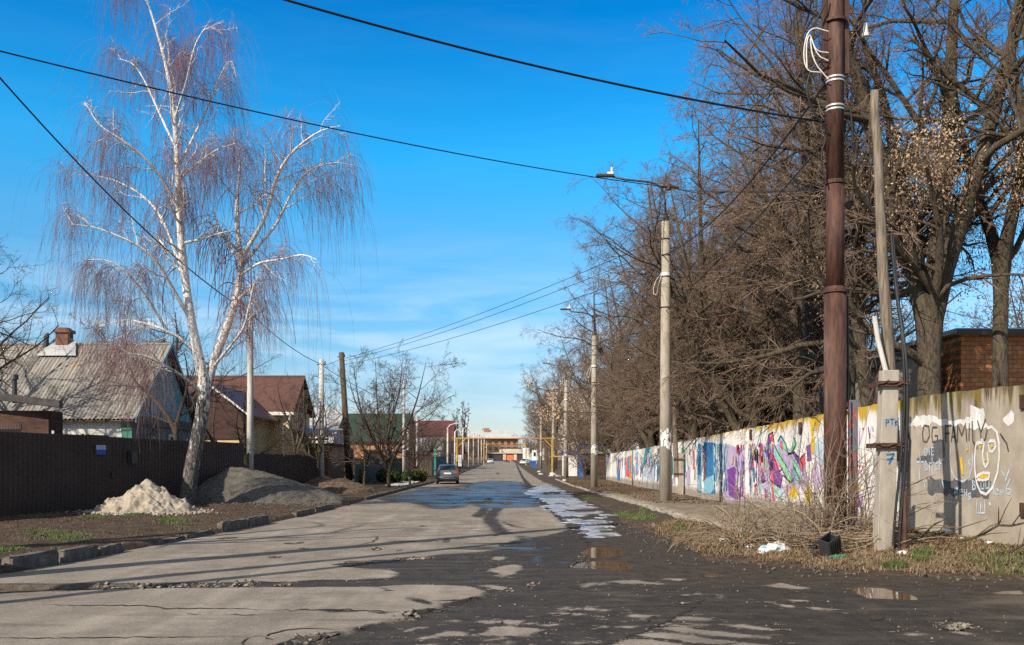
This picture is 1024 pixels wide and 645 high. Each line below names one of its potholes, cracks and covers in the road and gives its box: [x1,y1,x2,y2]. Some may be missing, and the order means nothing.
crack [56,604,262,615]
pothole [277,631,340,645]
